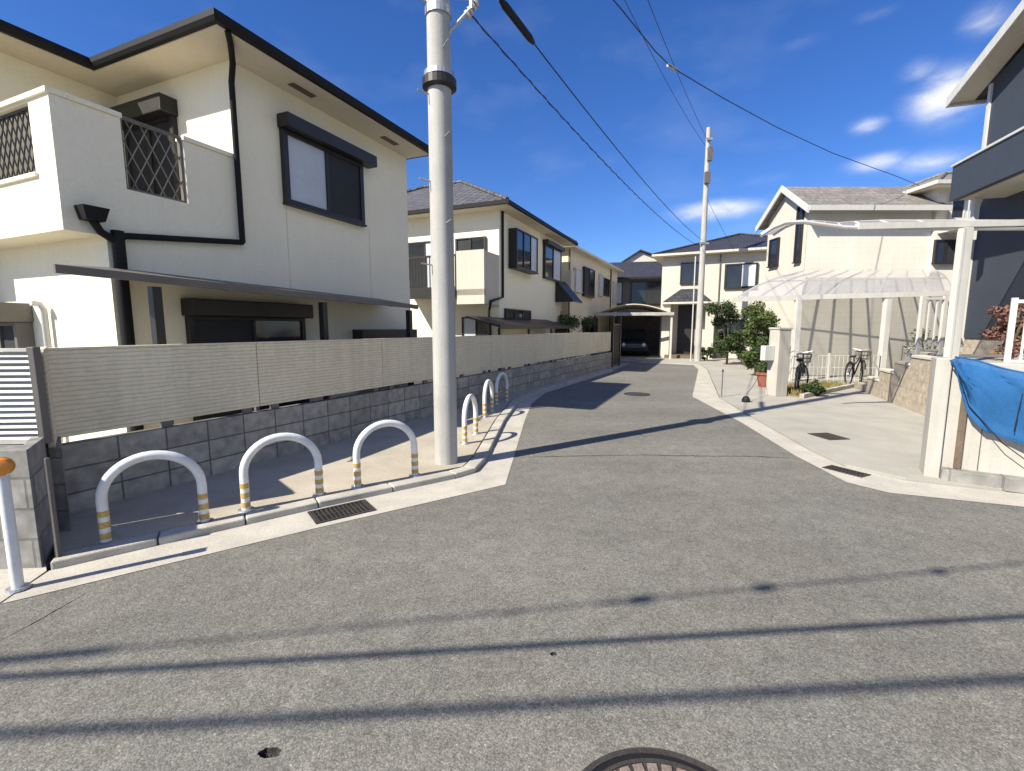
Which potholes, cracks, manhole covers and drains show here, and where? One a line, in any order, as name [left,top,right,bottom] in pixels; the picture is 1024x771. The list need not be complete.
drain grate [307,499,376,524]
drain grate [822,465,871,478]
pothole [258,747,281,758]
manhole cover [582,747,718,771]
